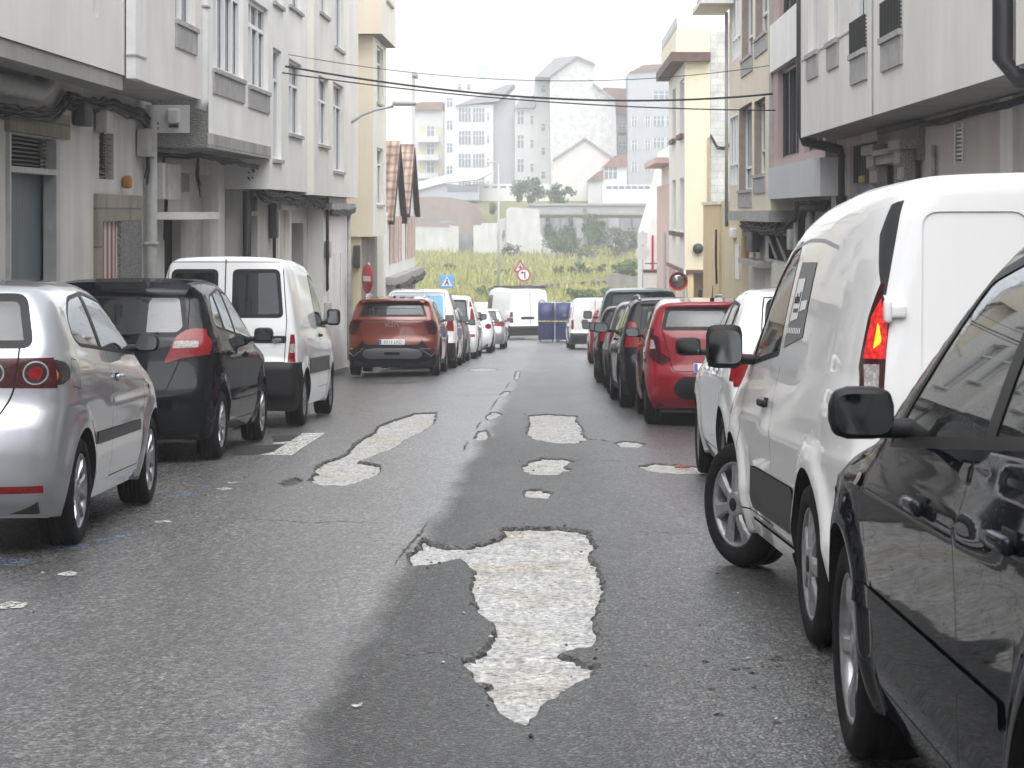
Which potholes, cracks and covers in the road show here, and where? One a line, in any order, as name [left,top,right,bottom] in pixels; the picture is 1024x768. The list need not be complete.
pothole [613,440,646,448]
pothole [306,412,439,486]
pothole [405,526,608,726]
pothole [473,430,491,440]
pothole [524,414,588,444]
pothole [519,457,577,475]
pothole [638,462,707,474]
pothole [521,488,554,499]
